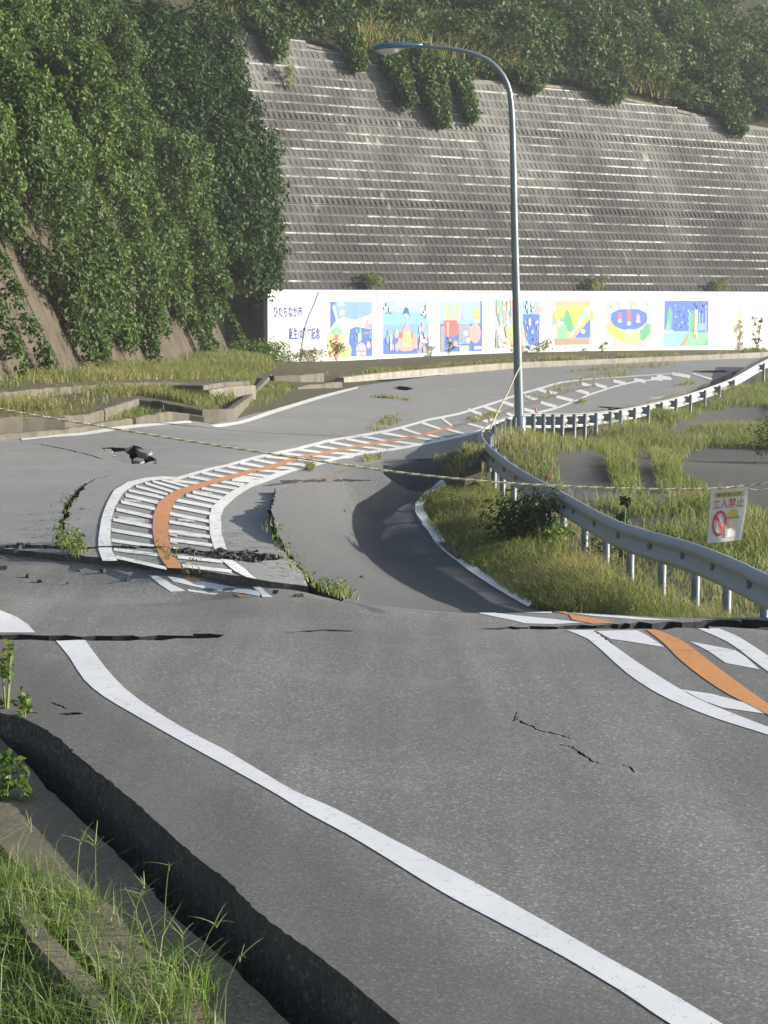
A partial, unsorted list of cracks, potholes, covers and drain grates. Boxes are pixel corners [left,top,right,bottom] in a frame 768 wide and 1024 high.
crack [0,443,283,563]
crack [512,712,635,772]
crack [484,619,768,645]
pothole [103,445,157,477]
crack [0,634,223,715]
